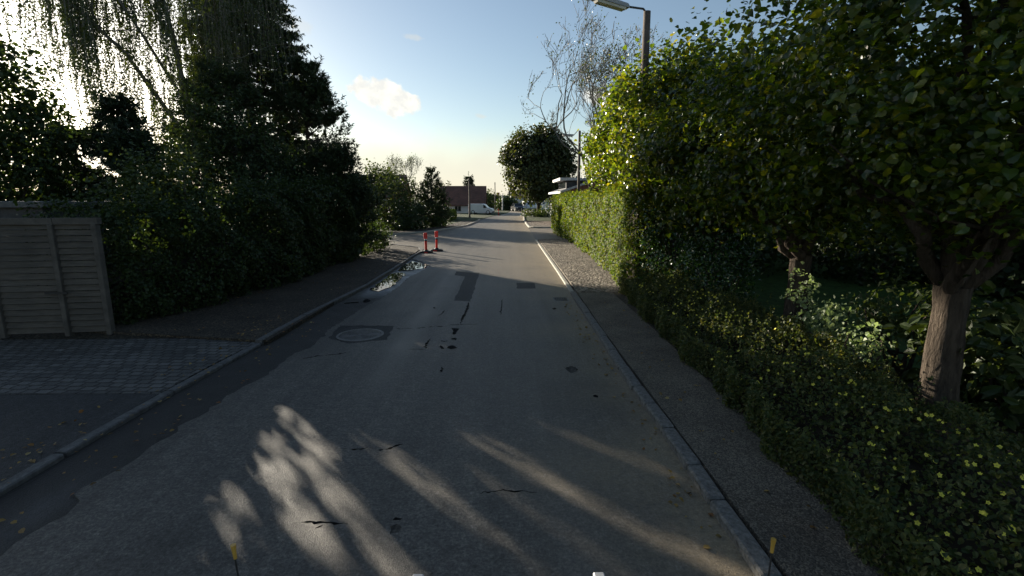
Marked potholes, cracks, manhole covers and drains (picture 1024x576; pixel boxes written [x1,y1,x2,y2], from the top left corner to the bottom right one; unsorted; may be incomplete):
crack [397,302,474,350]
manhole cover [336,329,384,341]
